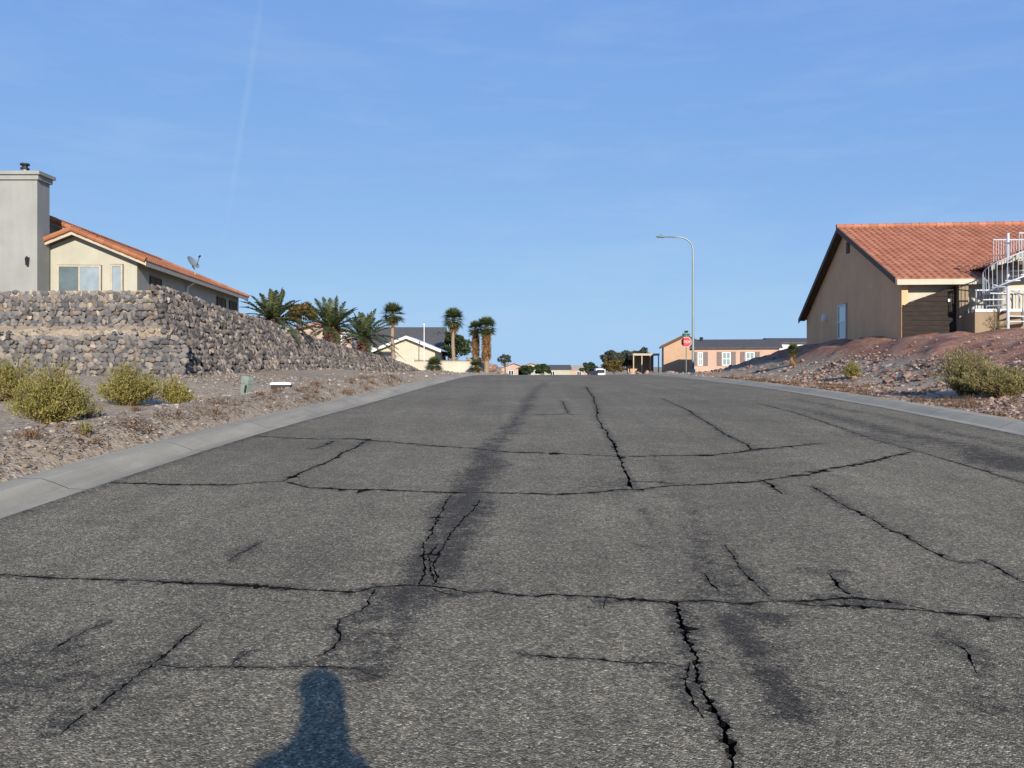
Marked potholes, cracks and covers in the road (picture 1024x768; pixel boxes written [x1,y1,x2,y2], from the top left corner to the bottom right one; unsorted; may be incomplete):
crack [0,387,1024,768]
